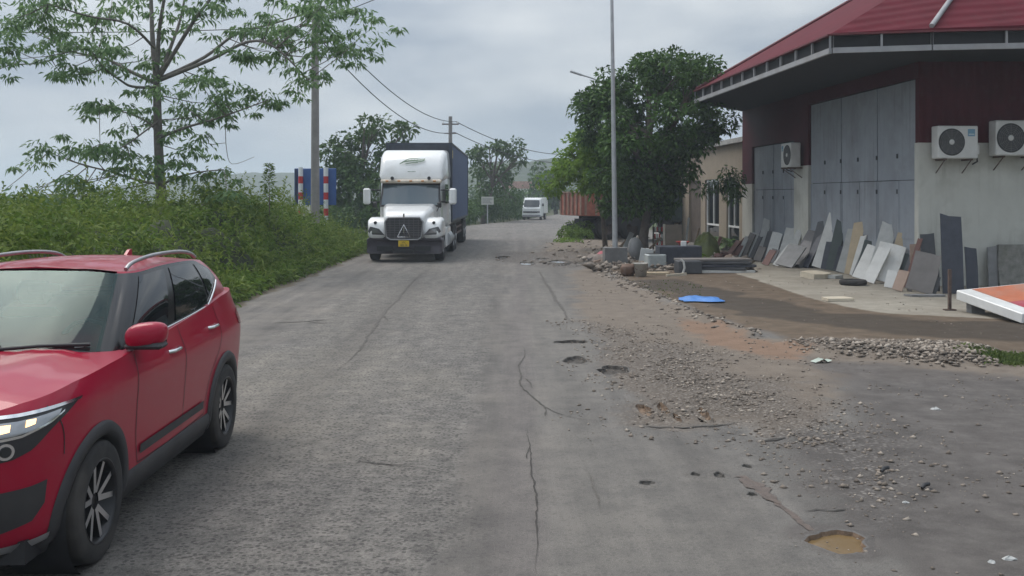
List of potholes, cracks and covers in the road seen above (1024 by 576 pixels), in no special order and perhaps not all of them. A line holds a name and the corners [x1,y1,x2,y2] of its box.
pothole [632,480,662,489]
pothole [559,356,591,366]
pothole [693,407,714,423]
pothole [666,412,686,424]
crack [334,276,419,373]
pothole [792,527,880,560]
pothole [684,471,707,479]
crack [518,350,735,570]
pothole [707,471,731,481]
pothole [632,404,661,418]
pothole [651,402,675,418]
pothole [590,365,635,377]
